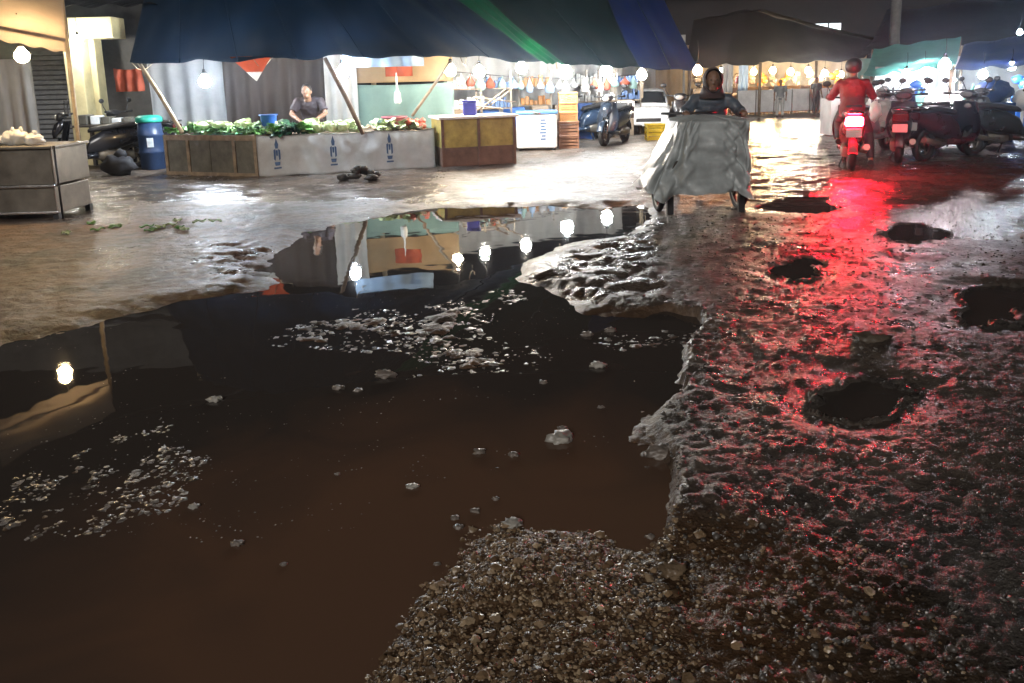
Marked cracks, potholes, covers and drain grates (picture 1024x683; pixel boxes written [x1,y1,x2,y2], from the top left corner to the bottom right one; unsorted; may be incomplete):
pothole [802,372,926,426]
pothole [752,194,845,214]
pothole [949,281,1024,331]
pothole [870,221,960,244]
pothole [764,255,829,284]
pothole [0,202,710,683]
